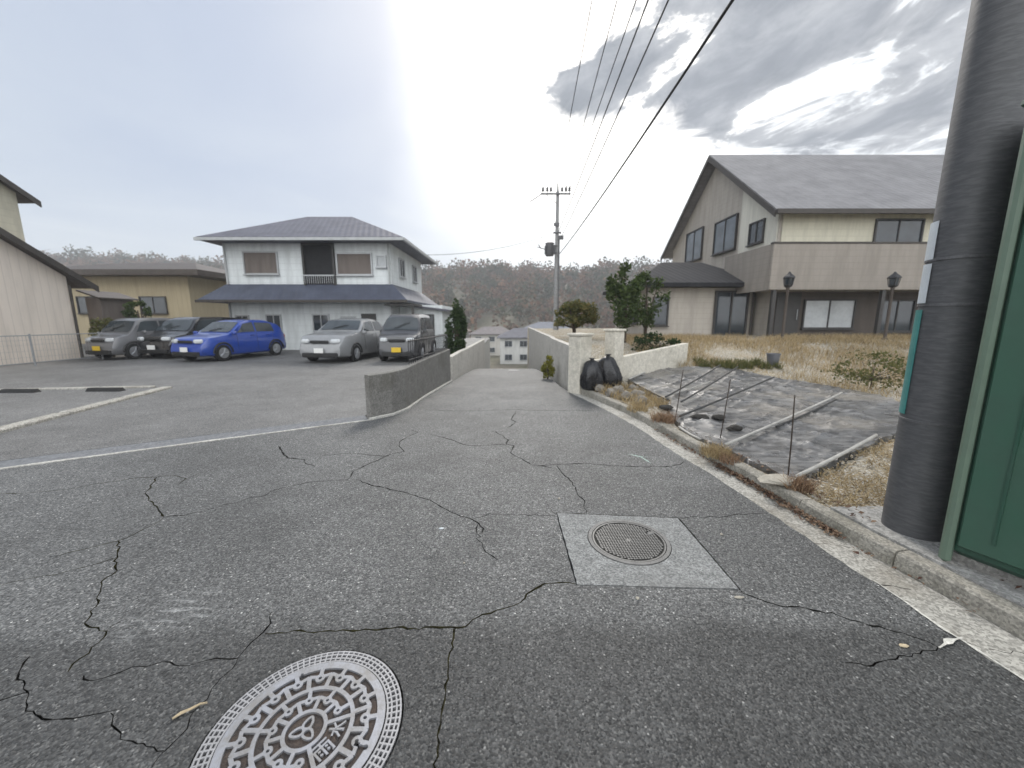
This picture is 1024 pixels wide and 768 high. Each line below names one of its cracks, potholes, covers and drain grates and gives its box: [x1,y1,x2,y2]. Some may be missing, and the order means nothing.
crack [434,412,683,513]
manhole cover [190,651,403,768]
manhole cover [588,520,671,566]
crack [0,430,574,768]
crack [741,591,939,667]
